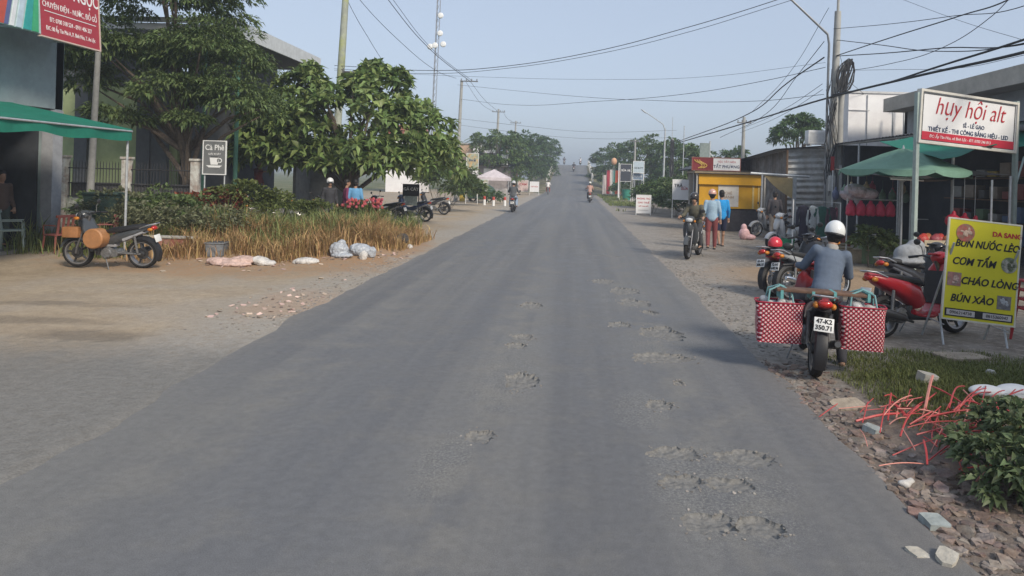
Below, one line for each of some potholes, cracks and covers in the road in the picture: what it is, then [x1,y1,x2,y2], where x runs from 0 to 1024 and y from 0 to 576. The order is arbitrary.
pothole [735,516,787,539]
pothole [658,474,705,489]
pothole [620,299,652,307]
pothole [638,326,687,341]
pothole [680,513,739,535]
pothole [610,287,640,295]
pothole [646,400,673,410]
pothole [505,372,540,391]
pothole [632,352,697,364]
pothole [647,446,701,462]
pothole [704,477,756,492]
pothole [465,430,496,444]
